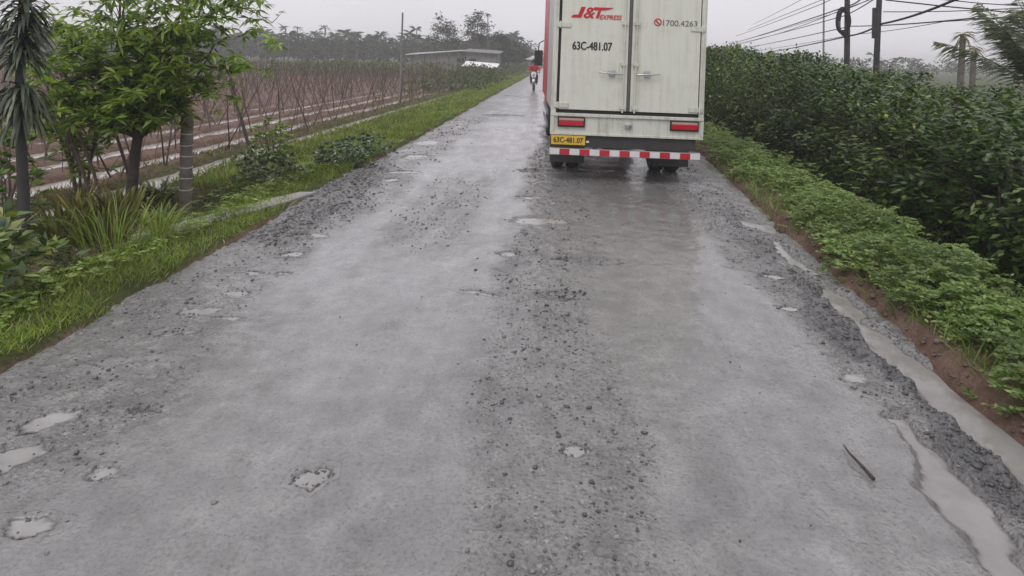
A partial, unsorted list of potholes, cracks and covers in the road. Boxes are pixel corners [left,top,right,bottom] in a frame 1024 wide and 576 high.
pothole [279,460,342,498]
pothole [164,304,233,319]
pothole [0,434,74,480]
pothole [488,249,527,257]
pothole [266,249,312,258]
pothole [213,287,260,299]
pothole [772,303,803,313]
pothole [498,214,587,227]
pothole [0,400,105,441]
pothole [829,366,885,387]
